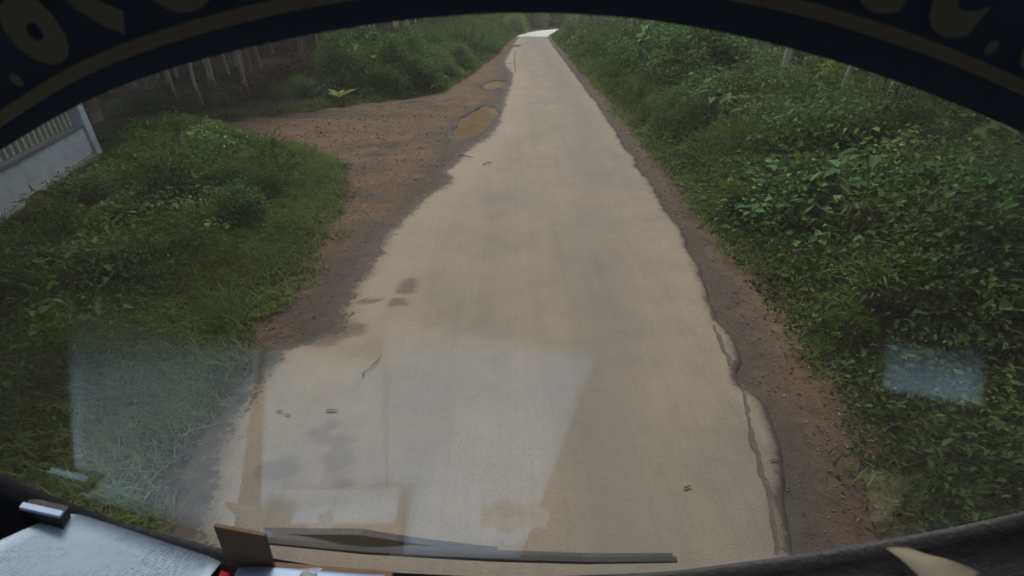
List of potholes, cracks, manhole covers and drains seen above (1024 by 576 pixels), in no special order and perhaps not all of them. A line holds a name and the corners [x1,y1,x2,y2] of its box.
pothole [447,103,502,145]
crack [712,325,732,366]
pothole [480,79,509,91]
crack [741,389,780,555]
